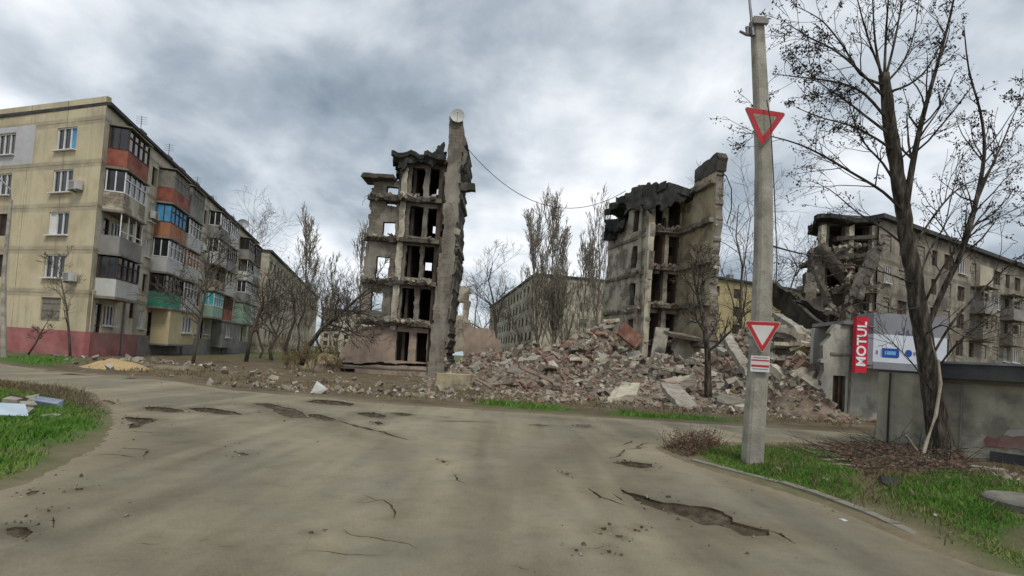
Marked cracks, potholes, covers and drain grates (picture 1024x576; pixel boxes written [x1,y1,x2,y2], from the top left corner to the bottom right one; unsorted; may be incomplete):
pothole [621,490,770,537]
pothole [256,403,307,418]
pothole [189,407,243,415]
pothole [6,527,33,538]
crack [308,530,416,556]
crack [588,488,627,506]
crack [340,421,408,440]
crack [609,441,647,459]
crack [357,494,396,518]
pothole [124,416,157,428]
